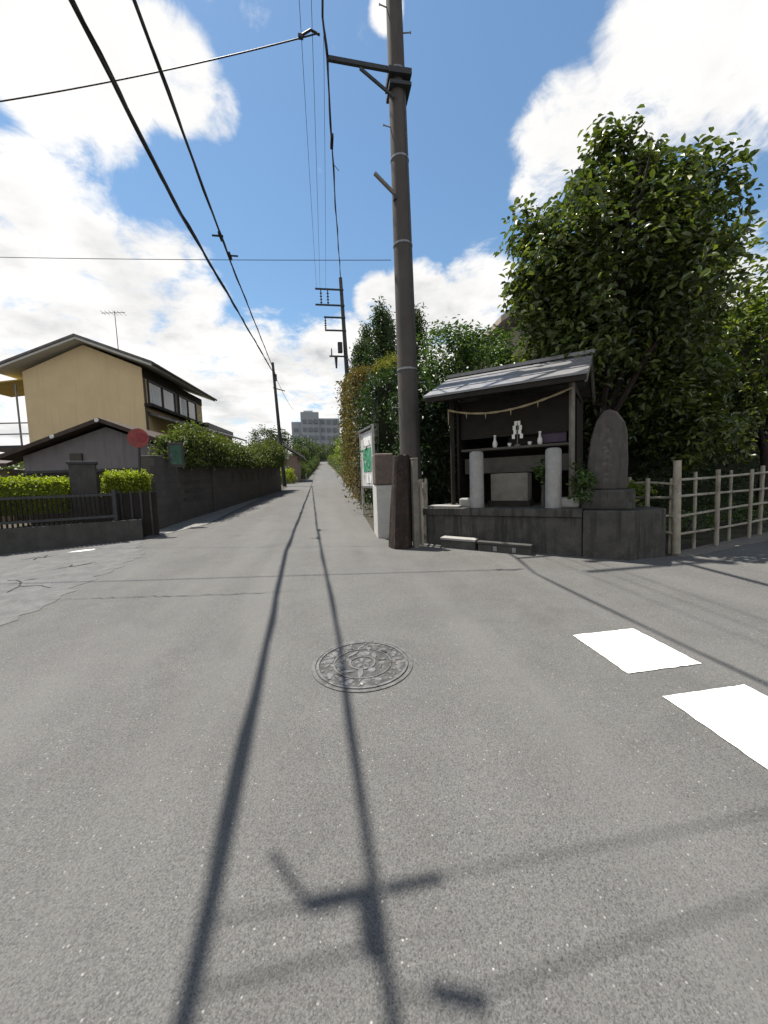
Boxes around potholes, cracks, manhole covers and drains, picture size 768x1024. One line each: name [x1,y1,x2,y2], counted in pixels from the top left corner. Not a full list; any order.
crack [8,555,300,600]
manhole cover [311,640,413,693]
